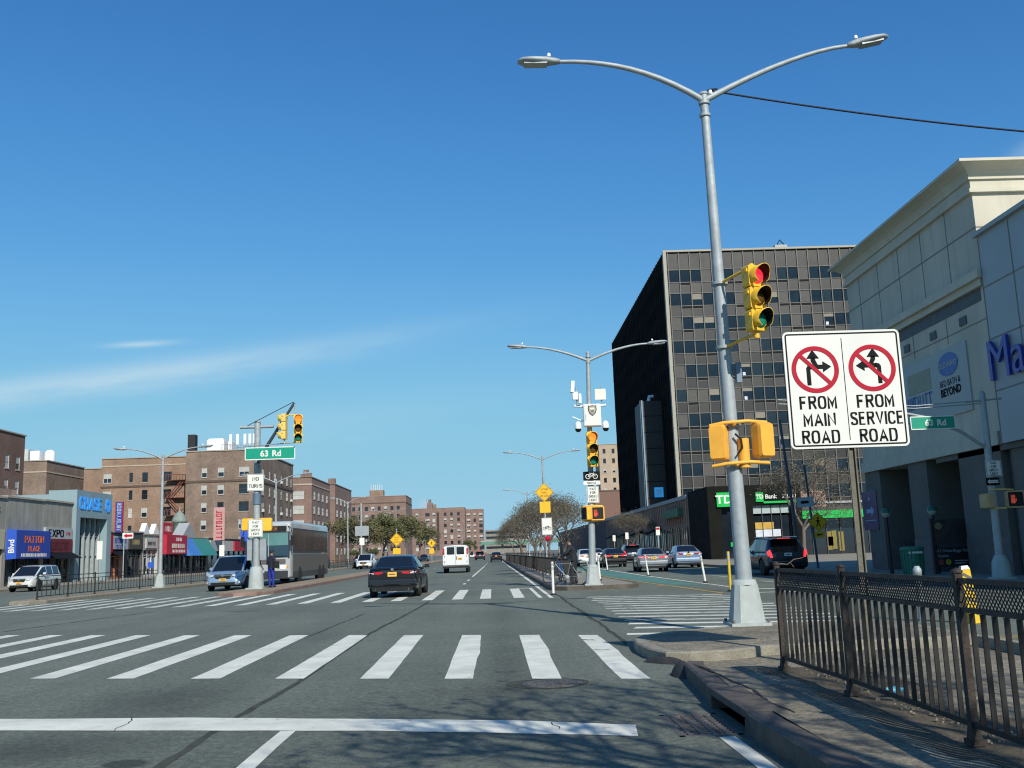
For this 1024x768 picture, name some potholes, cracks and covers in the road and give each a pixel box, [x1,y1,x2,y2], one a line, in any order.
manhole cover [506,678,589,689]
drain grate [659,686,783,737]
